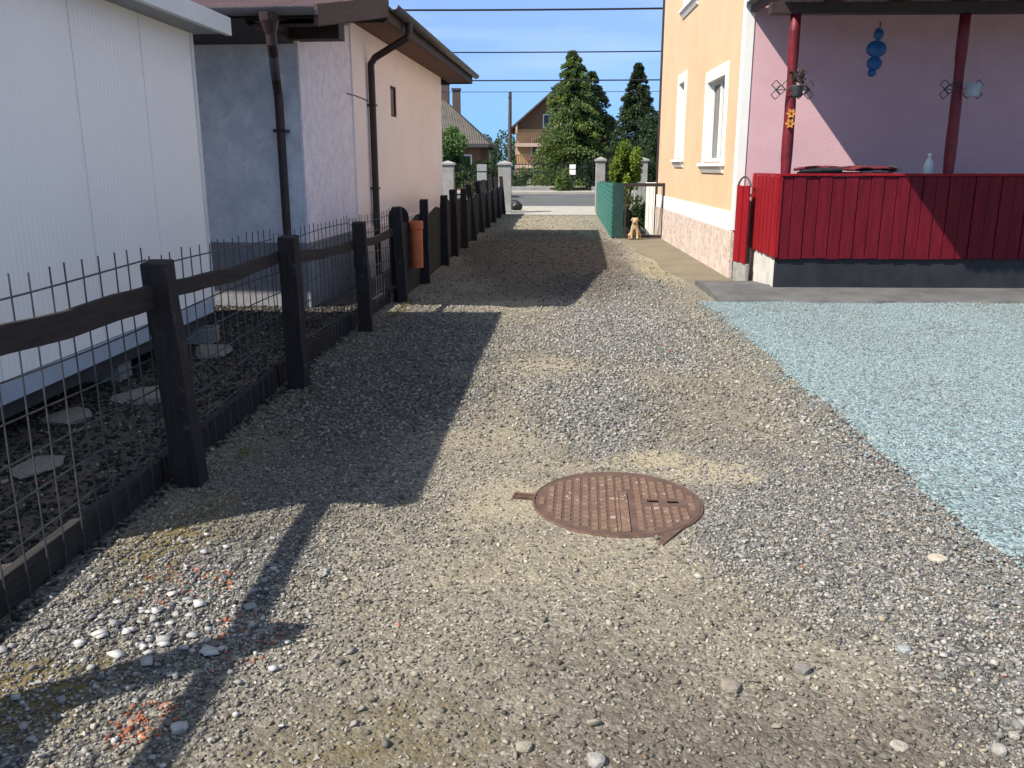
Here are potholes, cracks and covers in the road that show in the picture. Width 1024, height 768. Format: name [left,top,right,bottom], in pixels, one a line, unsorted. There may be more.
manhole cover [512,472,704,546]
